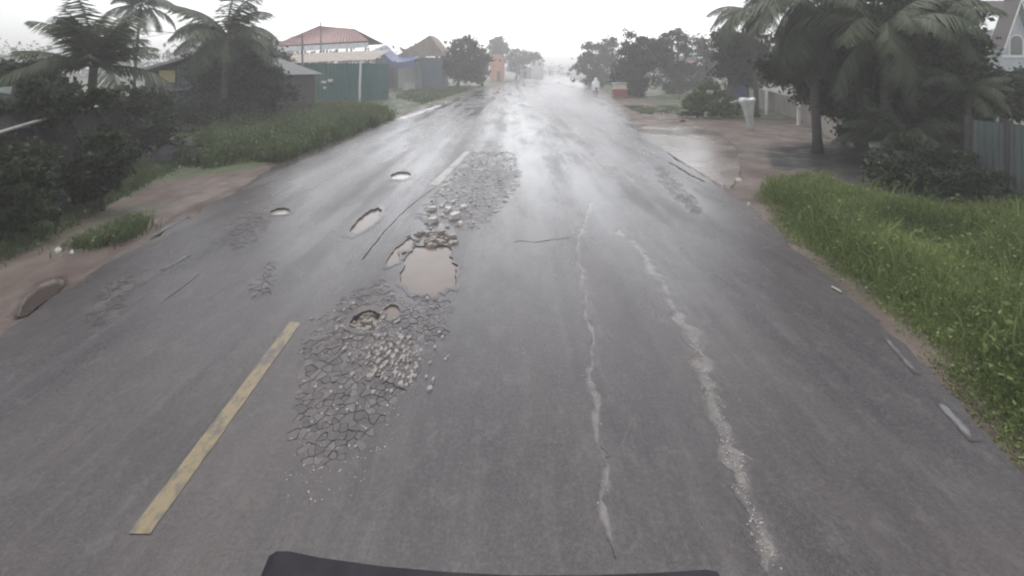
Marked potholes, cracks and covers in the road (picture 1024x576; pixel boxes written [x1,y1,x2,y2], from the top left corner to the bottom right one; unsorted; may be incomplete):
pothole [341,203,388,239]
pothole [17,278,64,319]
pothole [266,206,294,216]
pothole [342,306,387,335]
crack [86,274,199,327]
pothole [381,302,402,322]
crack [361,145,788,572]
pothole [386,170,416,181]
pothole [395,229,462,300]
